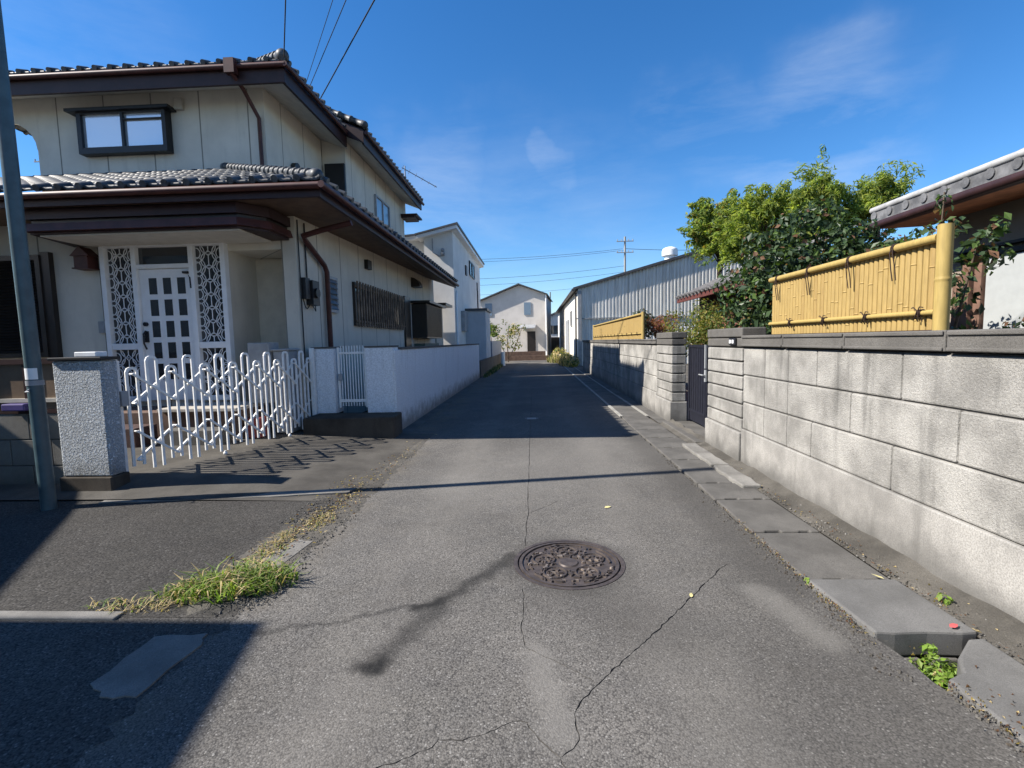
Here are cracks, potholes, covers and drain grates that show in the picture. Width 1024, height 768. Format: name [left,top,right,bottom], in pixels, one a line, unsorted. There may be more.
crack [376,565,726,768]
manhole cover [514,540,625,590]
